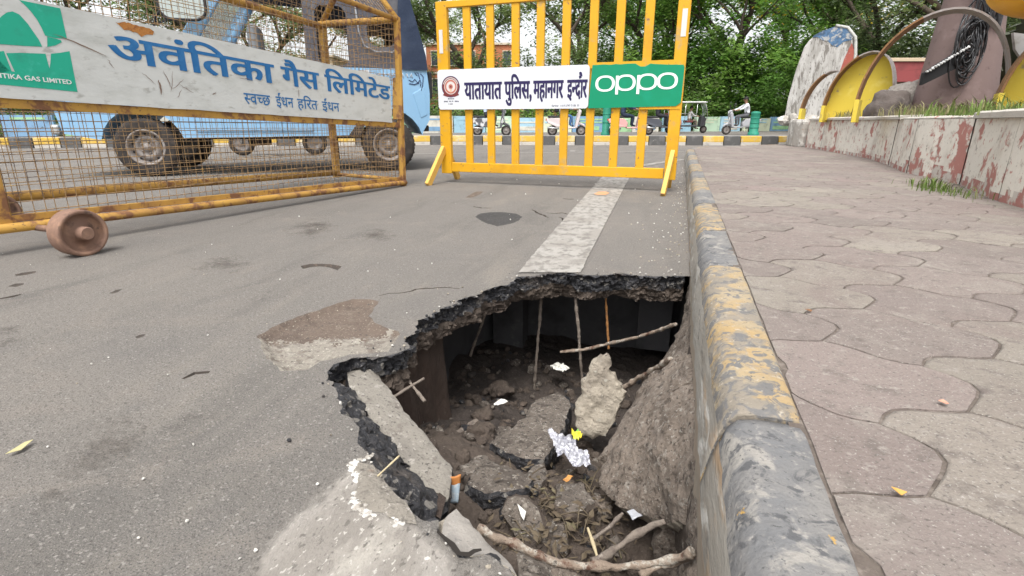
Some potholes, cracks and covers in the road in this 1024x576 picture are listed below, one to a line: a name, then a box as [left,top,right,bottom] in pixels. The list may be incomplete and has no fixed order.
pothole [326,273,698,576]
crack [379,287,459,296]
